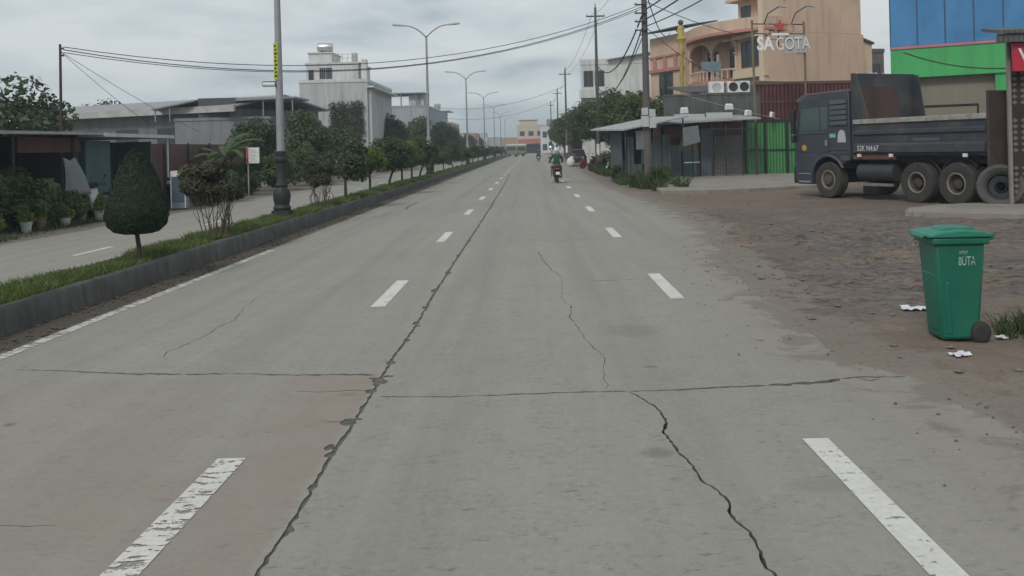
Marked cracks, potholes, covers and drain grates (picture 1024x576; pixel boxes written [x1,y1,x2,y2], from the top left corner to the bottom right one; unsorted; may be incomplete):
crack [630,392,777,576]
crack [538,252,609,388]
